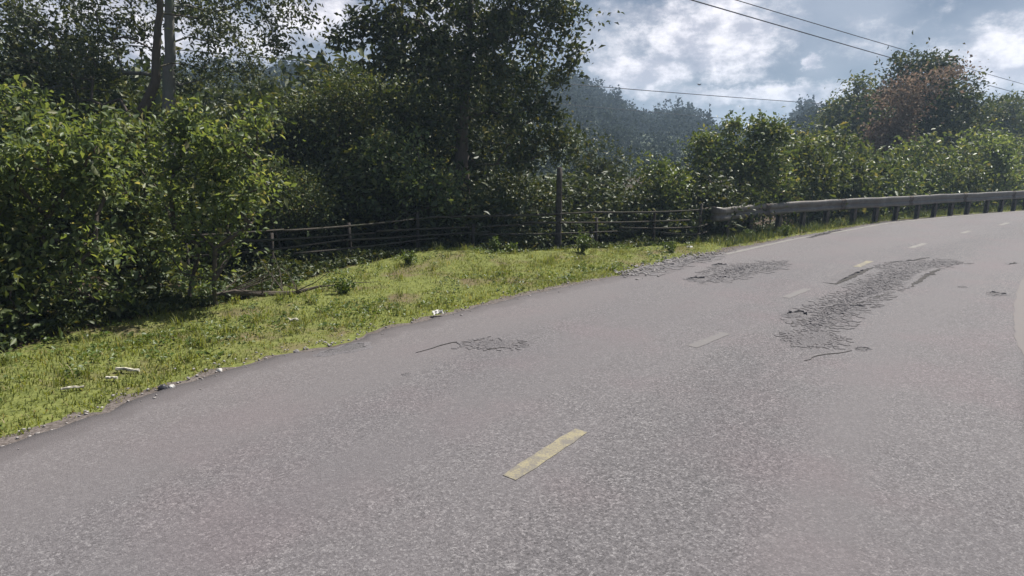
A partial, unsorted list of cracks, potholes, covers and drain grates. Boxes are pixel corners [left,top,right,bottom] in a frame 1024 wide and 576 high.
crack [626,254,969,361]
crack [415,336,528,353]
